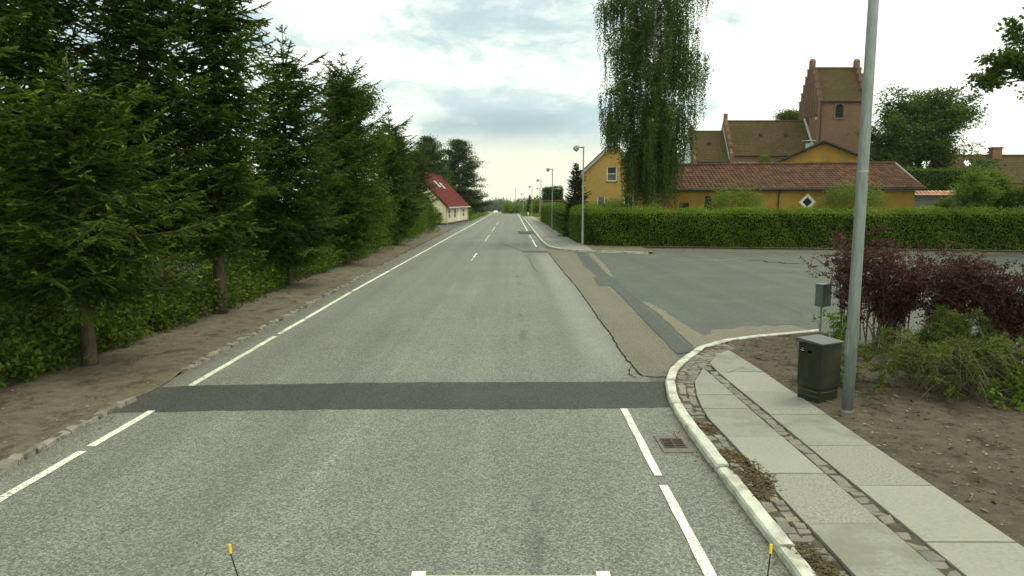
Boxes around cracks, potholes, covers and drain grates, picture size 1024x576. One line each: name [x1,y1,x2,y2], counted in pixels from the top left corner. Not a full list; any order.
drain grate [654,435,694,453]
